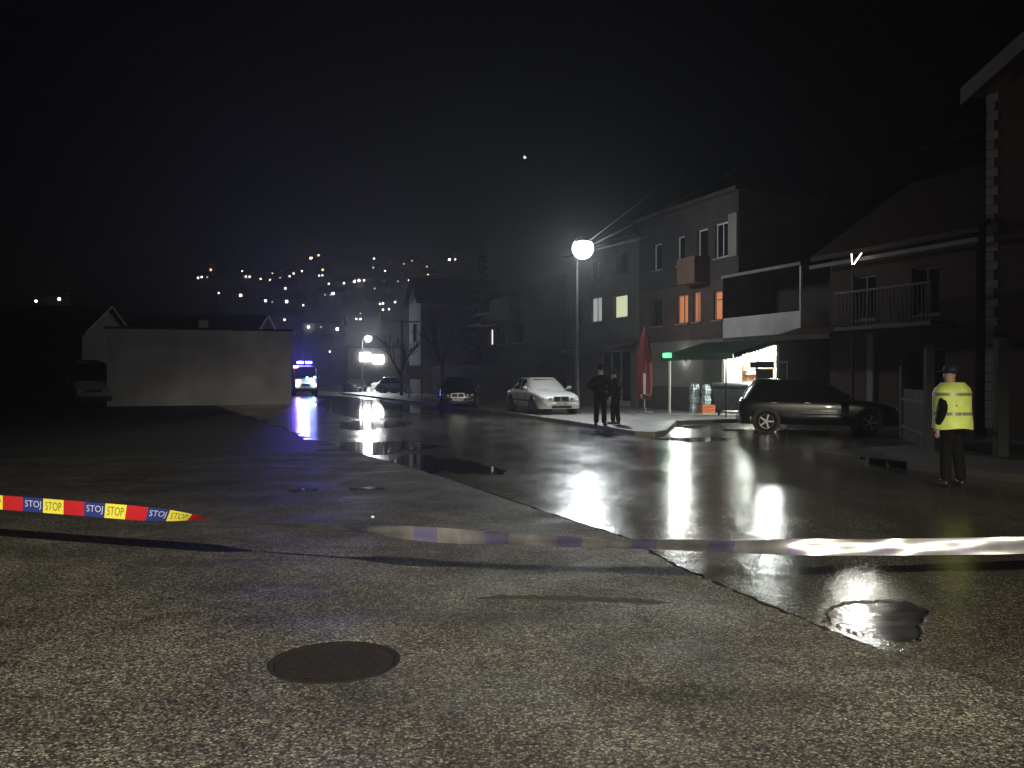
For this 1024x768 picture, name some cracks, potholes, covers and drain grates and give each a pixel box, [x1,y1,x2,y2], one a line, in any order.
pothole [822,599,931,645]
manhole cover [267,641,401,684]
